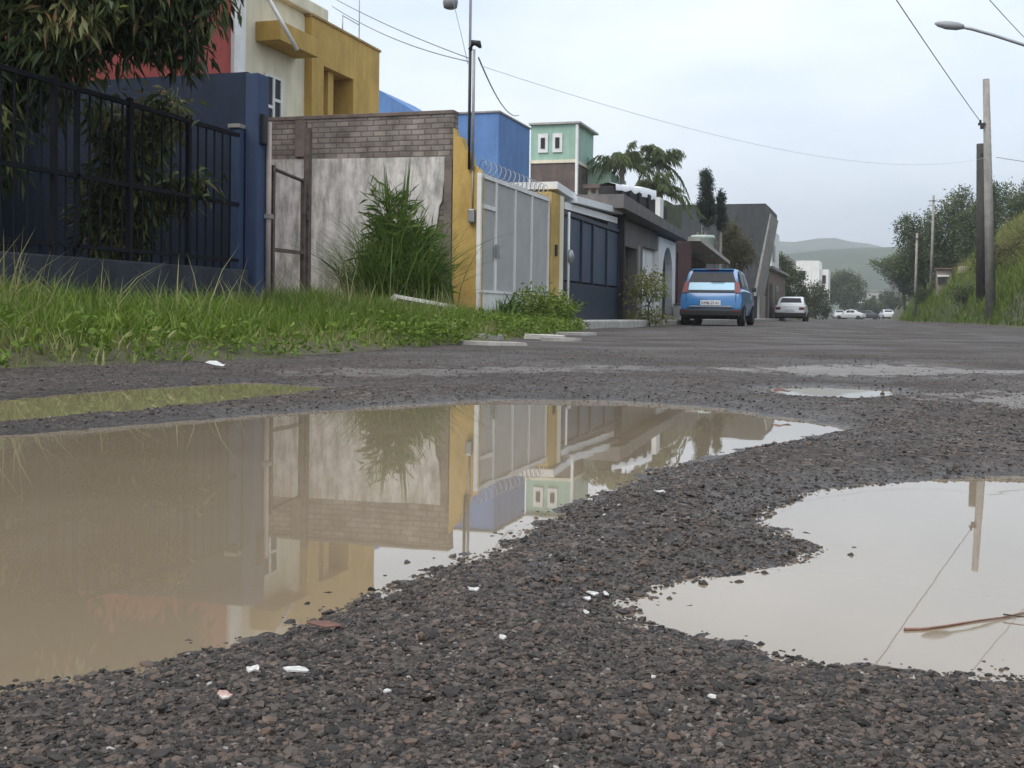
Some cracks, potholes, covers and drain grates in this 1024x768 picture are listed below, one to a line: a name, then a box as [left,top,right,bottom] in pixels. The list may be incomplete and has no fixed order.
pothole [740,384,910,398]
pothole [0,380,352,422]
pothole [580,468,1024,682]
pothole [0,395,871,693]
